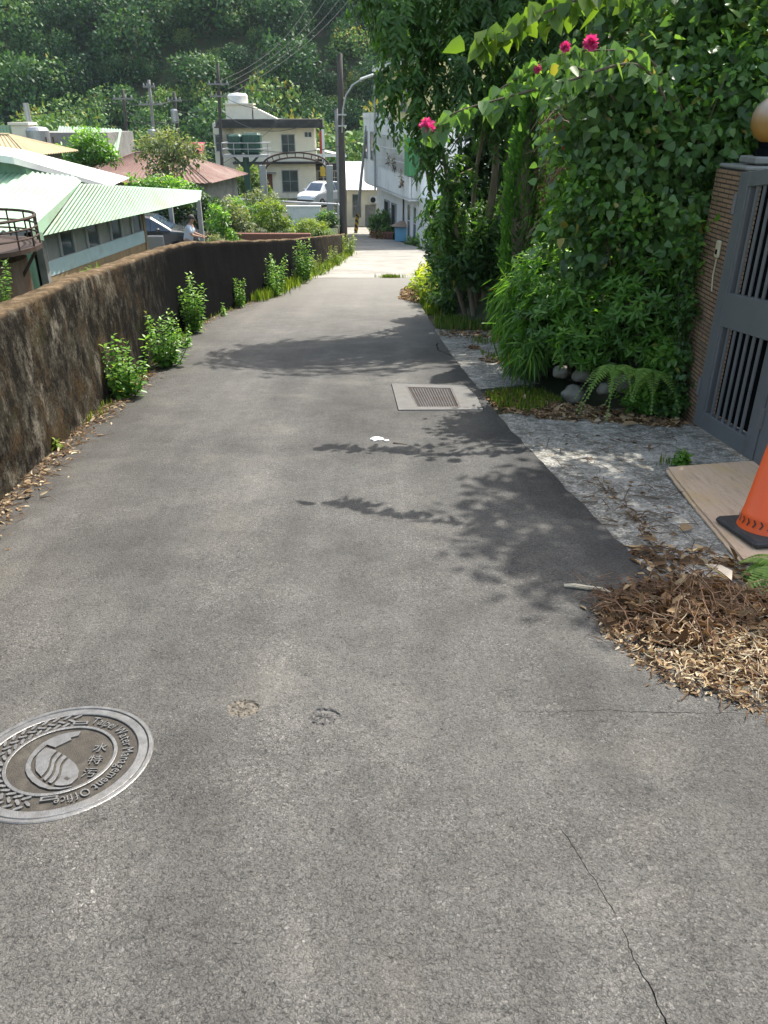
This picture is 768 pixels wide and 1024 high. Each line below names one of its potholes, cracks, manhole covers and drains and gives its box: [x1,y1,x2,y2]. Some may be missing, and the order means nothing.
crack [559,827,668,1024]
pothole [307,707,343,726]
manhole cover [0,706,154,824]
pothole [227,699,261,717]
